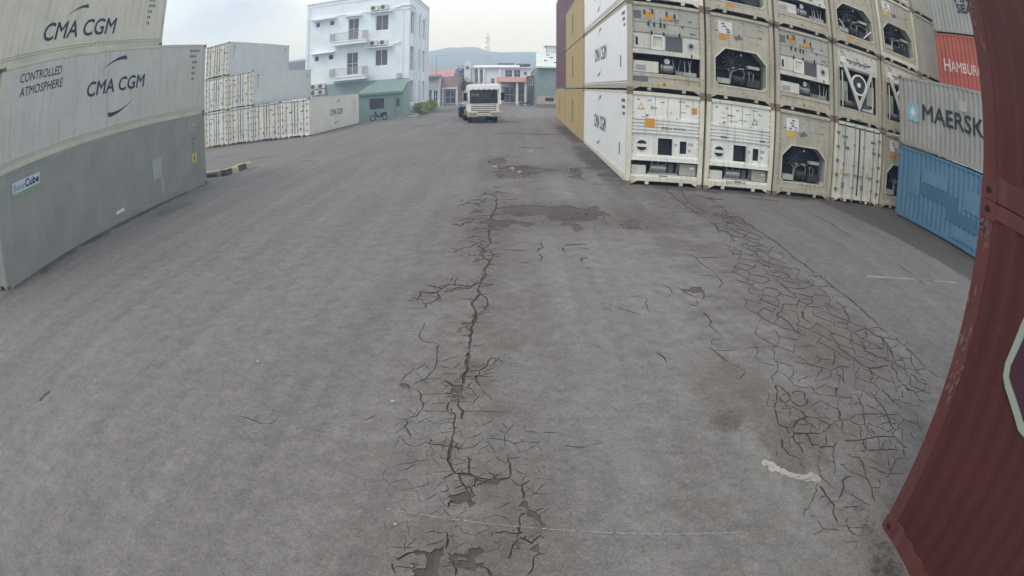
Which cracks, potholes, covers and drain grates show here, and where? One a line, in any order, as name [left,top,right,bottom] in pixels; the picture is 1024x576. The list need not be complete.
pothole [412,546,444,576]
pothole [447,547,485,571]
crack [382,186,598,576]
crack [601,250,760,379]
crack [665,190,938,548]
